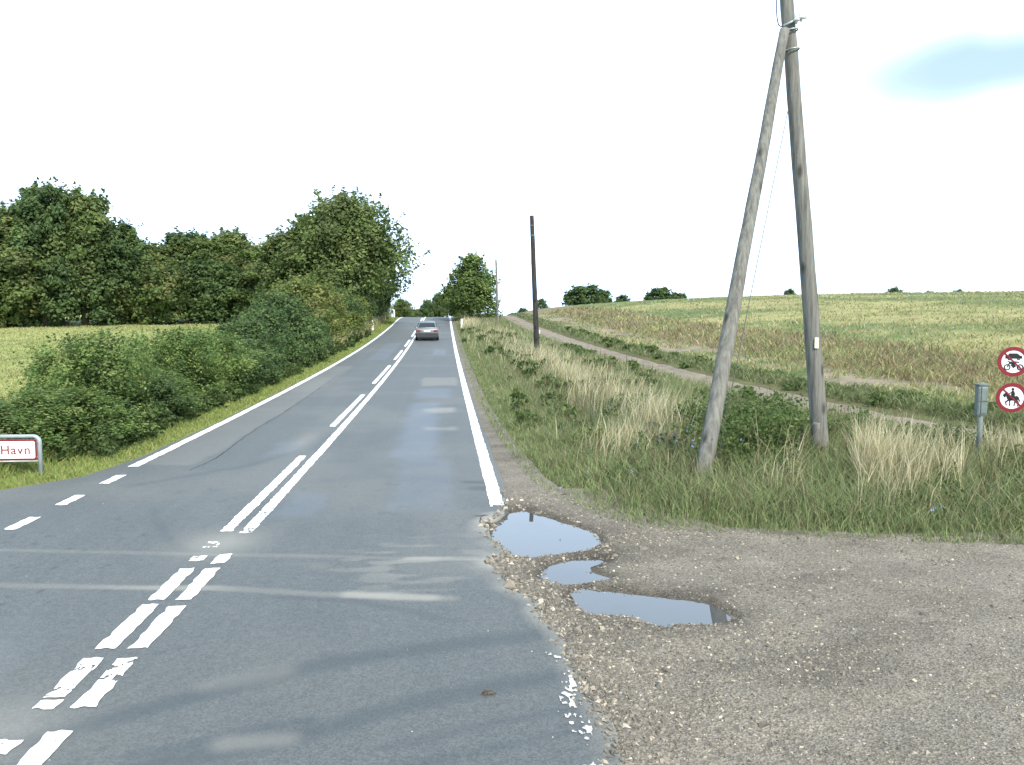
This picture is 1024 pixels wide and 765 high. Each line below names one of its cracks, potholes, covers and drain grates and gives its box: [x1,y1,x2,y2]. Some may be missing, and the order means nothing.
pothole [528,551,623,585]
pothole [489,504,612,557]
pothole [556,581,750,628]
crack [195,378,334,468]
